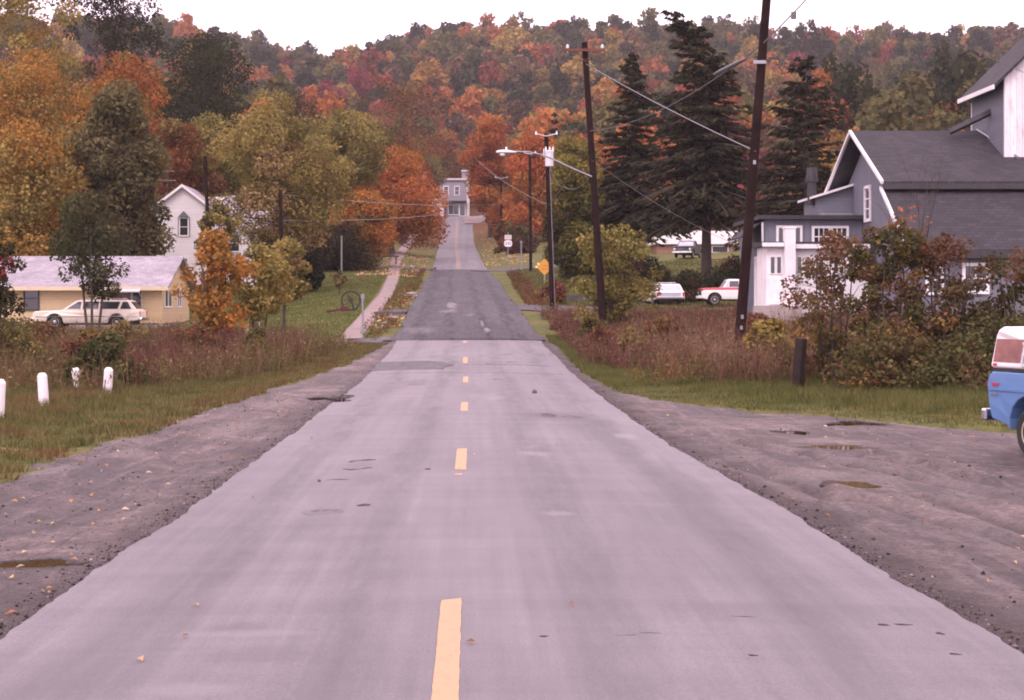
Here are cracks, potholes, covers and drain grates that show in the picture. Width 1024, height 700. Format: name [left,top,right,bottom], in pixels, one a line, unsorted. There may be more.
pothole [819,480,882,488]
pothole [0,558,92,568]
